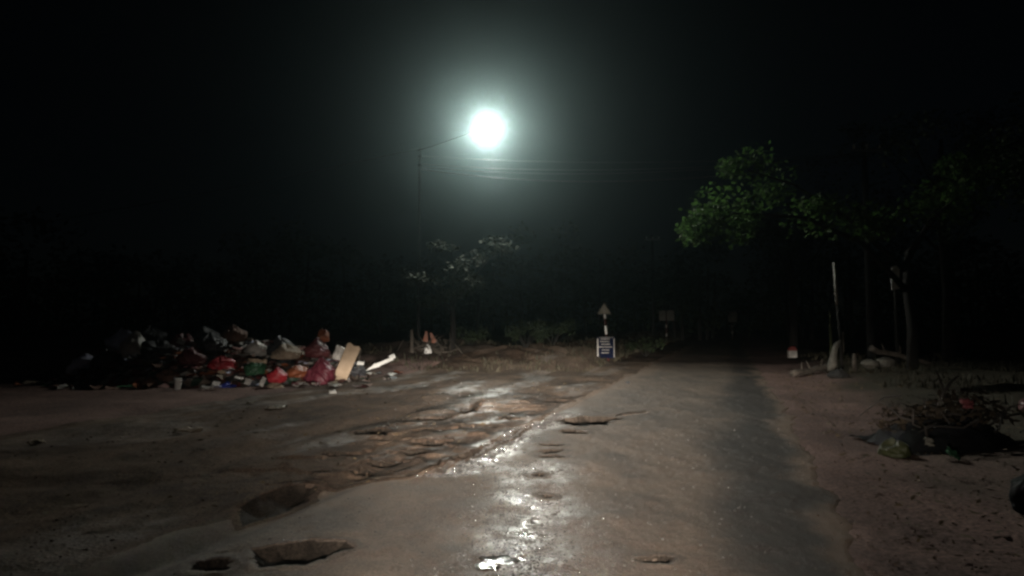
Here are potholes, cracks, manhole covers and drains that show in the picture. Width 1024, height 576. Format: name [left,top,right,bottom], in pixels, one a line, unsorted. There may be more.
pothole [227,534,369,573]
pothole [405,438,456,448]
pothole [531,492,563,501]
pothole [520,471,555,479]
pothole [359,458,411,471]
pothole [301,468,343,476]
pothole [174,553,258,576]
pothole [346,427,398,438]
pothole [532,448,572,456]
pothole [313,450,355,459]
pothole [390,449,439,457]
pothole [225,479,328,531]
